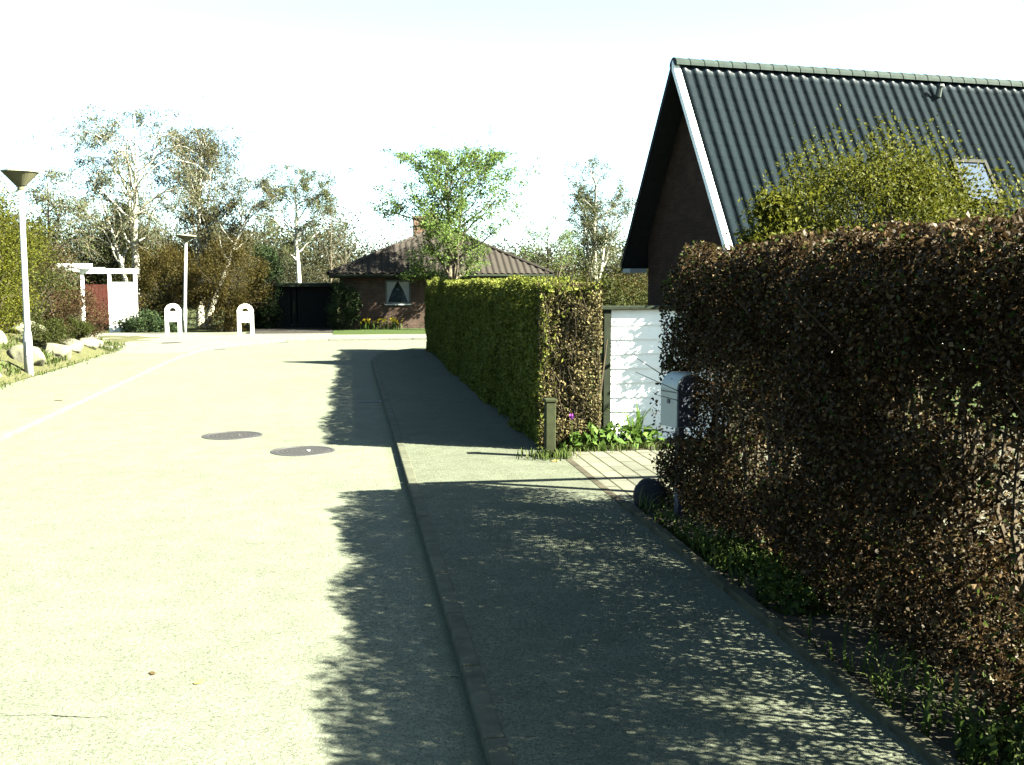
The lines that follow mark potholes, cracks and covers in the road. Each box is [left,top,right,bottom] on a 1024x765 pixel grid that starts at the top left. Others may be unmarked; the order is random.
manhole cover [270,446,335,456]
manhole cover [201,431,263,440]
